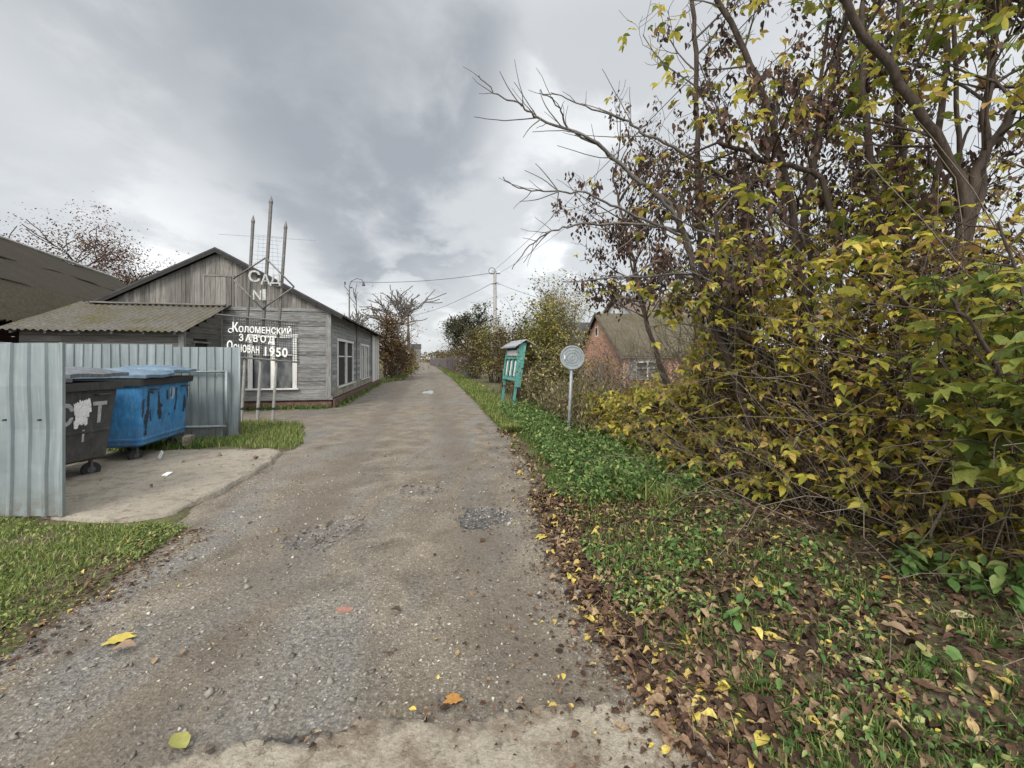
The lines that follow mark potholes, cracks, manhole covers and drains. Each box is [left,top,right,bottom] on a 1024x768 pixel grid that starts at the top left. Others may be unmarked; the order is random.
pothole [266,509,378,572]
pothole [449,504,518,532]
